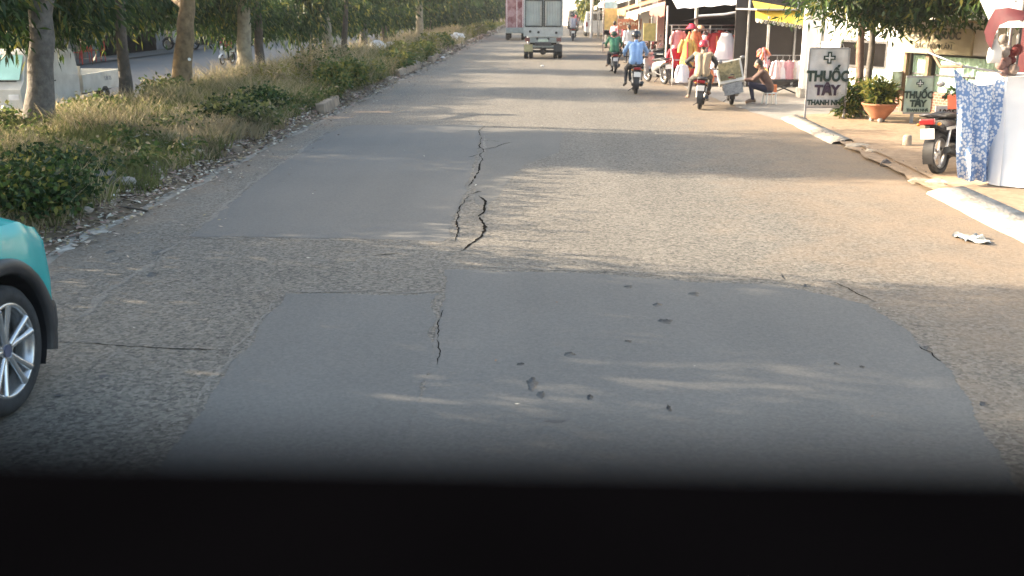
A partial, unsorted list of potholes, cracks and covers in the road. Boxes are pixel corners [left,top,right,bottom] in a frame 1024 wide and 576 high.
pothole [526,377,538,392]
crack [455,126,549,251]
